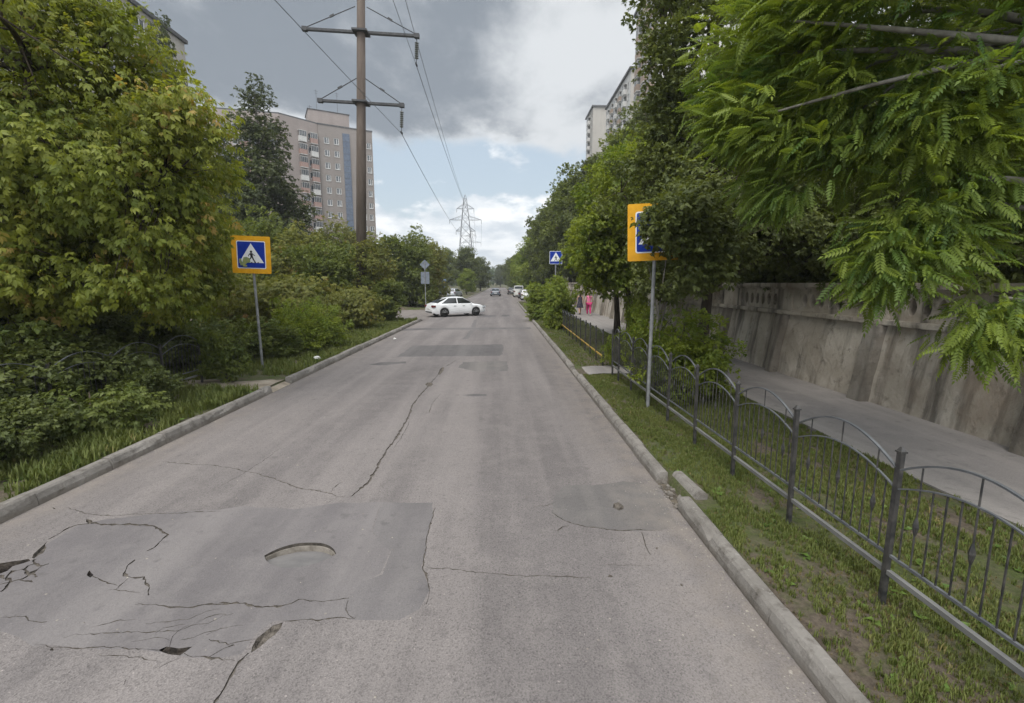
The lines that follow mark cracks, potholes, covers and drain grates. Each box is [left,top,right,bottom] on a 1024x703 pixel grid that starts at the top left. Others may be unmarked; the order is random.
crack [46,508,354,703]
crack [169,381,435,499]
crack [0,559,49,592]
crack [422,509,589,604]
